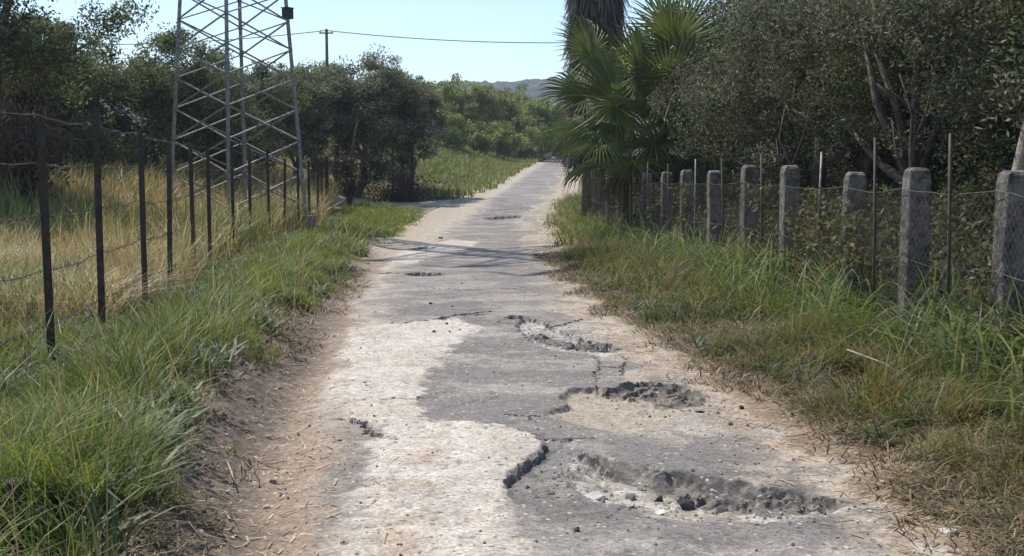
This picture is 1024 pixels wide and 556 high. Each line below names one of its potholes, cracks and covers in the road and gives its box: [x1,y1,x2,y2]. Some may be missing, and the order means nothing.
pothole [569,452,856,524]
pothole [512,319,620,358]
pothole [542,381,711,435]
crack [396,311,510,325]
crack [592,356,629,383]
